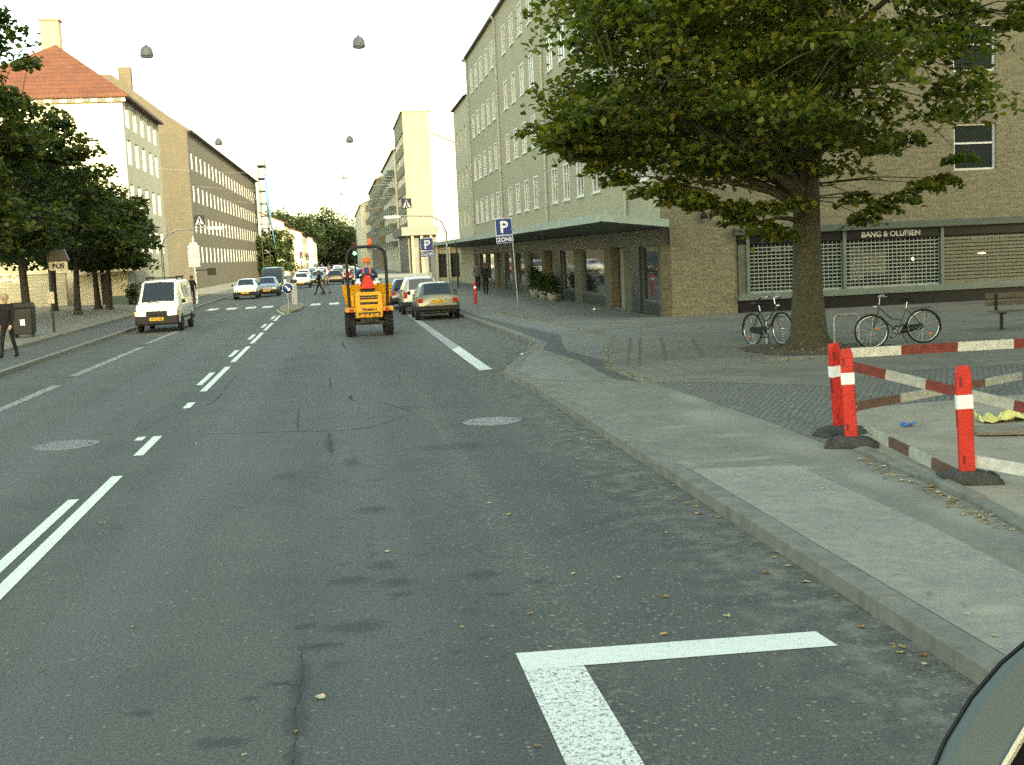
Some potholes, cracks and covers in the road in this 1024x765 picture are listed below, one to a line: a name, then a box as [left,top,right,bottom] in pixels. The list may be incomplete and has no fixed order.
crack [222,402,415,454]
manhole cover [33,440,100,450]
manhole cover [463,417,522,426]
